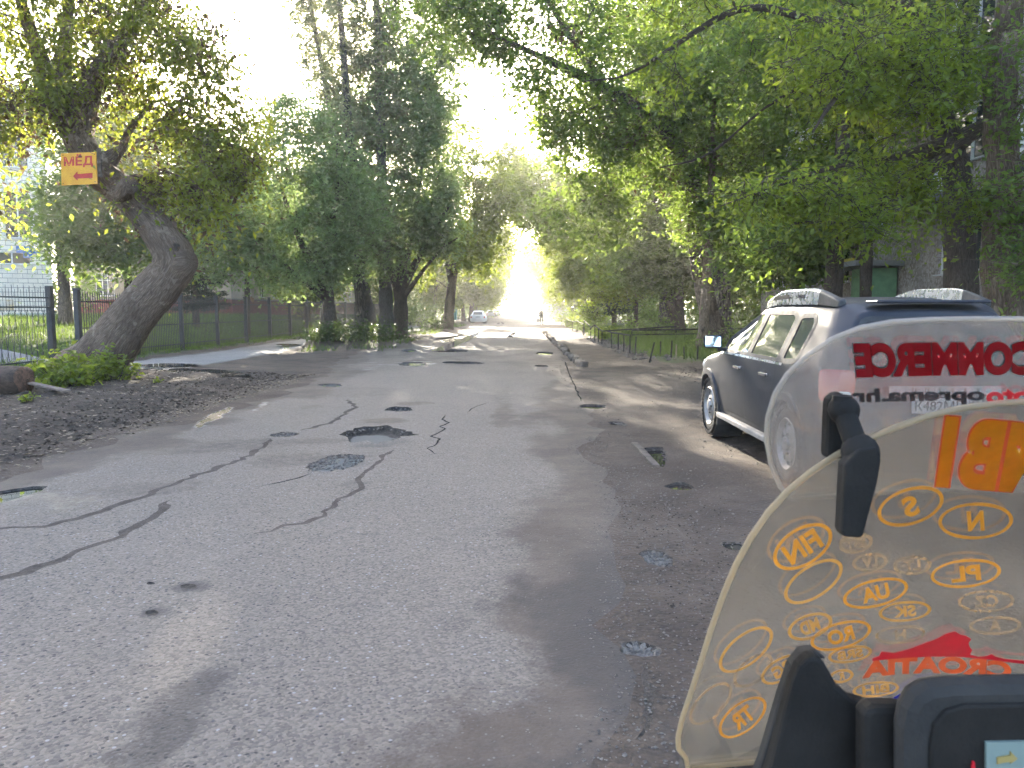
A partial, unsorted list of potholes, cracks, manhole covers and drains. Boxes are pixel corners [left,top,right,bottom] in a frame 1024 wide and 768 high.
crack [565,362,582,400]
pothole [639,550,673,567]
crack [427,416,450,454]
pothole [618,641,662,657]
crack [254,450,394,534]
pothole [0,486,47,503]
pothole [639,447,667,467]
pothole [665,482,694,490]
pothole [339,425,418,444]
